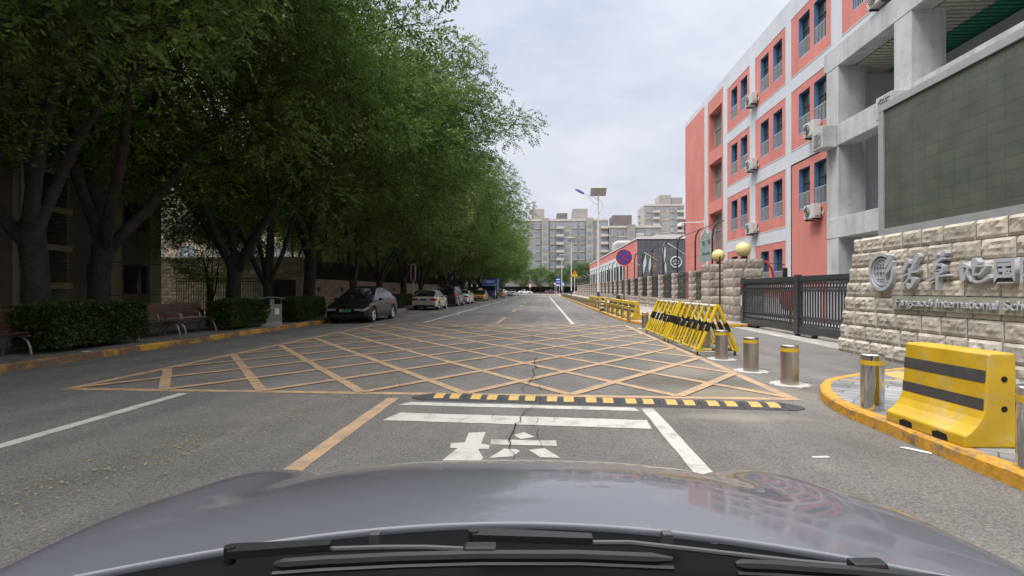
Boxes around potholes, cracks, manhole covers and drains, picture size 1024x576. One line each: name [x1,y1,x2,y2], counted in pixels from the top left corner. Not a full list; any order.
crack [491,320,543,459]
